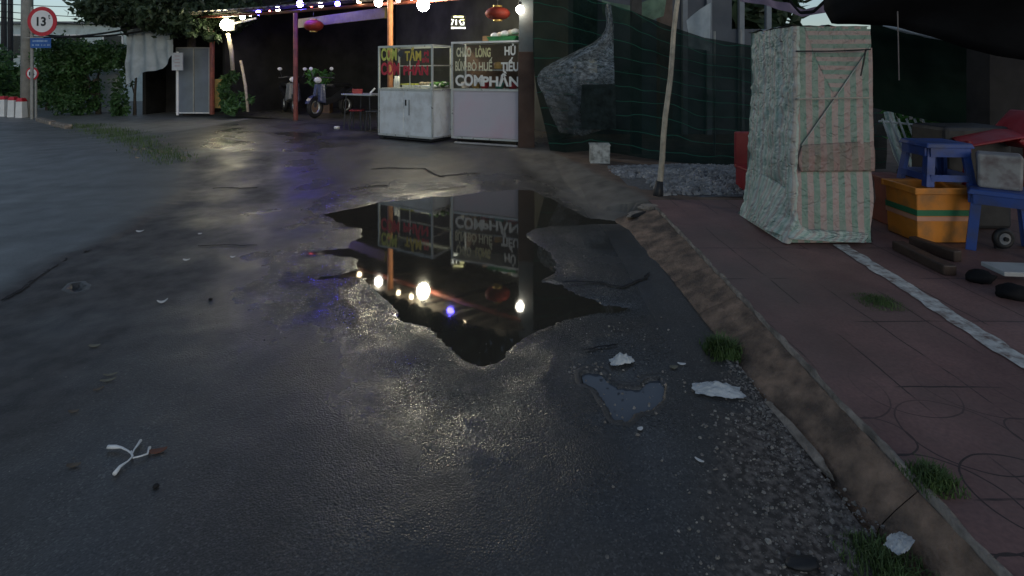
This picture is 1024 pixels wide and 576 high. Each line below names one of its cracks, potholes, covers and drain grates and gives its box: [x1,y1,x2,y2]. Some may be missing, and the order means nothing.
pothole [574,365,673,426]
pothole [62,281,91,294]
crack [364,167,467,187]
